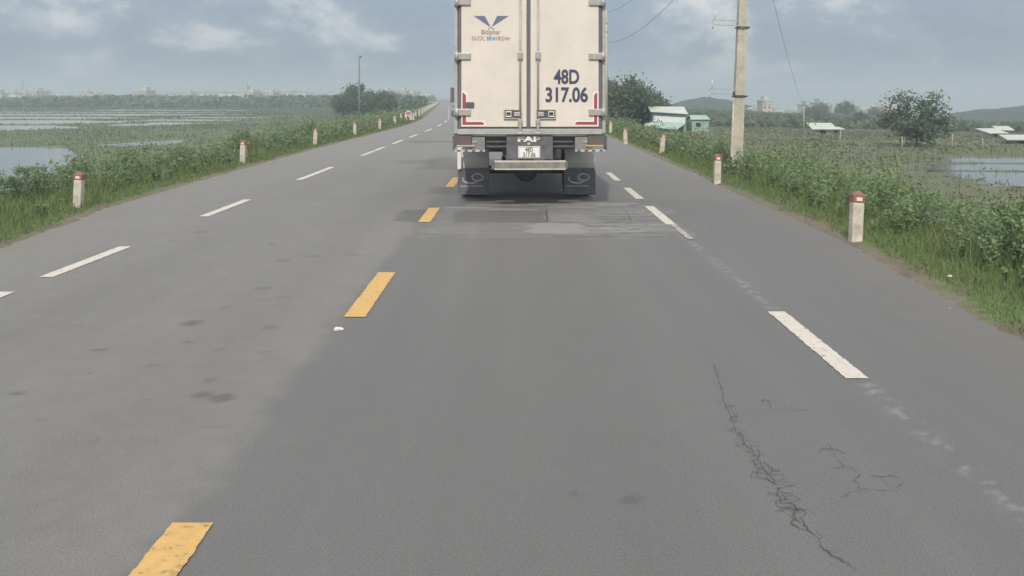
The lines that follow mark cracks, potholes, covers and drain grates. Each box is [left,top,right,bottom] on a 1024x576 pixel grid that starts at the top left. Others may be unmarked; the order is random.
crack [714,365,852,567]
crack [820,446,904,496]
